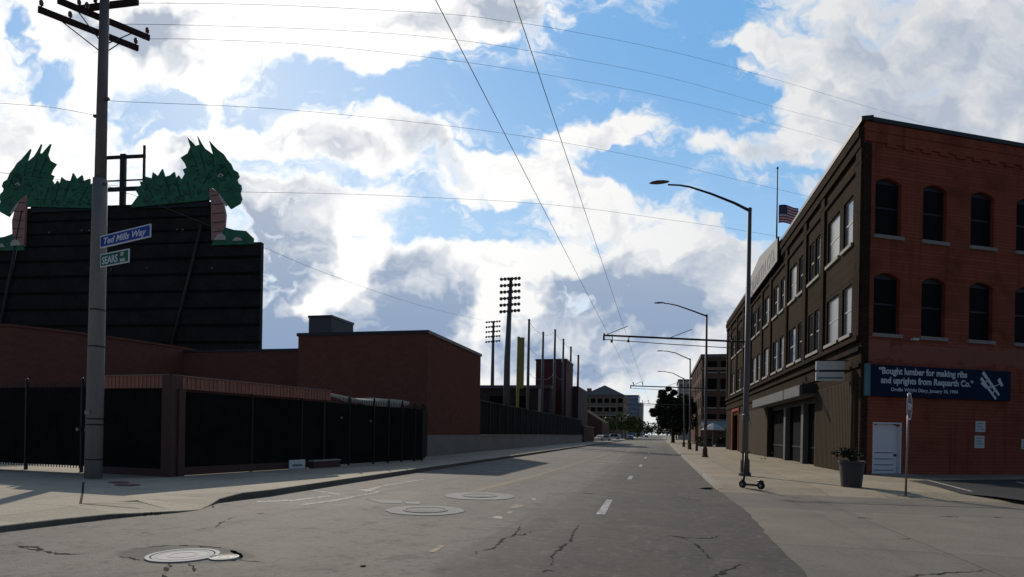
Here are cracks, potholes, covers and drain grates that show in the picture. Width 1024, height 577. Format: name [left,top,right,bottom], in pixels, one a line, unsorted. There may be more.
crack [120,517,232,577]
manhole cover [444,492,514,500]
crack [675,535,741,577]
manhole cover [144,548,220,563]
crack [476,524,531,554]
crack [543,525,579,572]
crack [19,546,100,554]
manhole cover [385,506,465,516]
